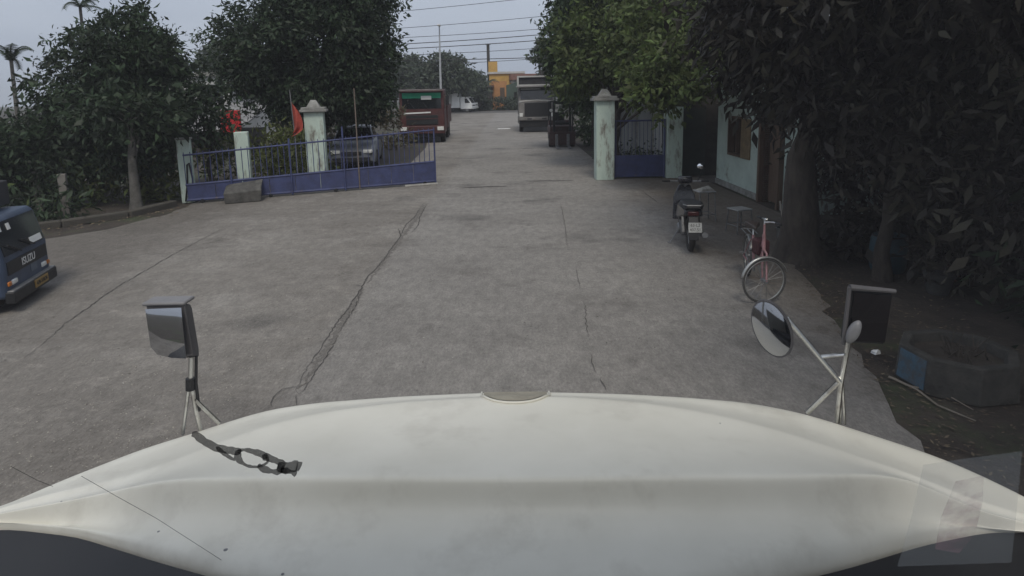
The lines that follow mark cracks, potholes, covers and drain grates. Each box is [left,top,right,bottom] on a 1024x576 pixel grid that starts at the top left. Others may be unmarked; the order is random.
crack [24,234,211,358]
crack [270,204,427,406]
